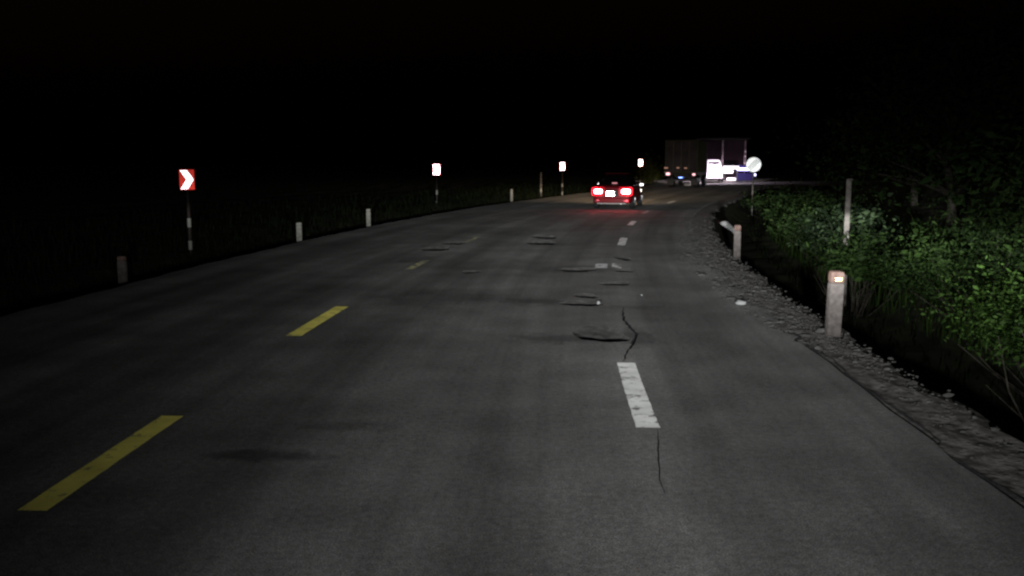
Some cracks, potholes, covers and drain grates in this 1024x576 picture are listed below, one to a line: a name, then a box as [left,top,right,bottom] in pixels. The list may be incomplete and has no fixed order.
crack [657,430,665,493]
pothole [572,325,630,342]
crack [622,307,639,361]
